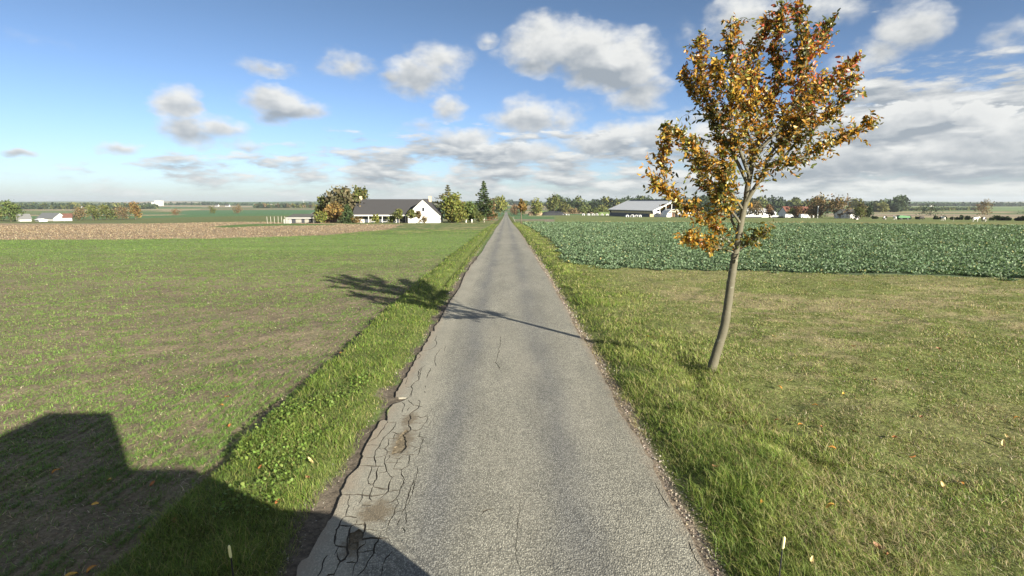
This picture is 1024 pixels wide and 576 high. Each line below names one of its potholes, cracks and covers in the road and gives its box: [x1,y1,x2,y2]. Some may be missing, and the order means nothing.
pothole [348,529,363,550]
crack [318,341,445,576]
pothole [391,430,409,455]
